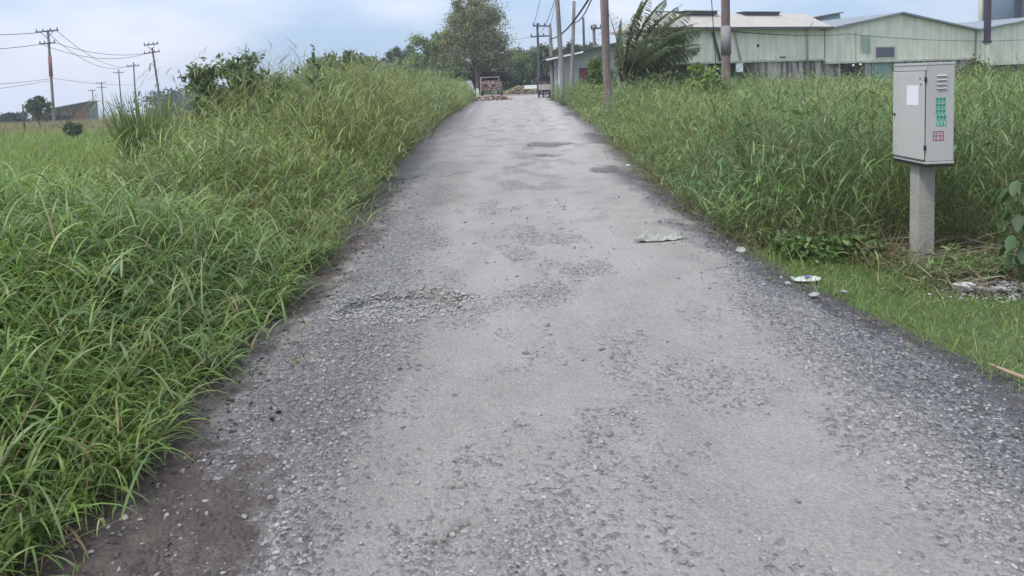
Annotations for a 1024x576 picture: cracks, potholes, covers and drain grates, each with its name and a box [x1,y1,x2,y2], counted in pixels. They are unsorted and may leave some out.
pothole [587,166,648,174]
pothole [333,289,472,320]
